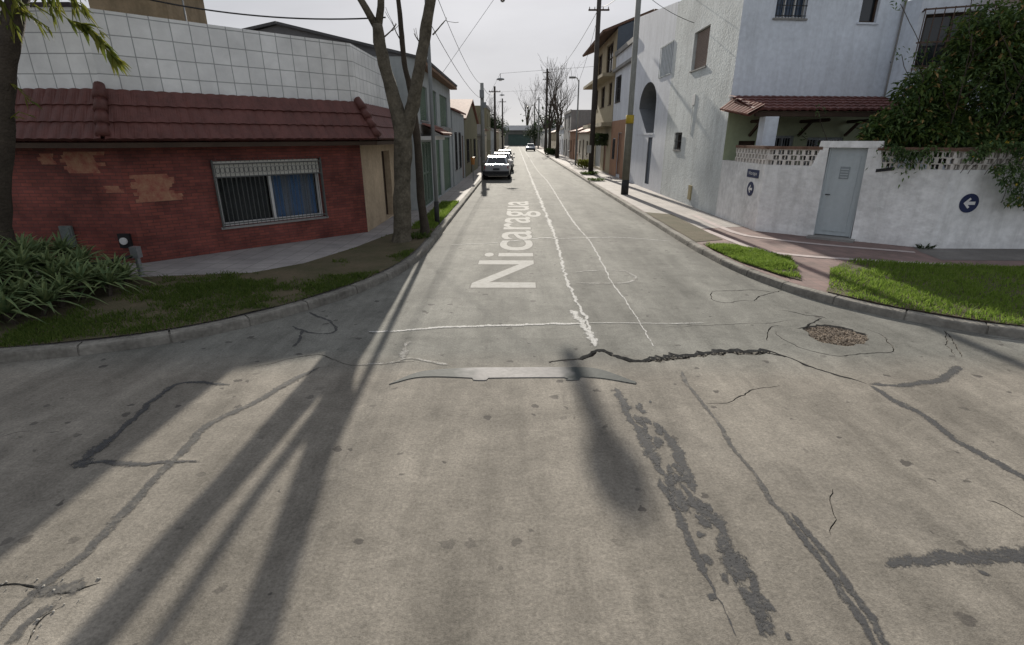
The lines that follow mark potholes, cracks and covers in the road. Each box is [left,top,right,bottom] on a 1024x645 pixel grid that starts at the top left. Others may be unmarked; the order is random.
crack [944,331,1015,357]
crack [829,490,837,534]
crack [549,310,895,384]
crack [709,386,776,404]
pothole [802,324,869,346]
